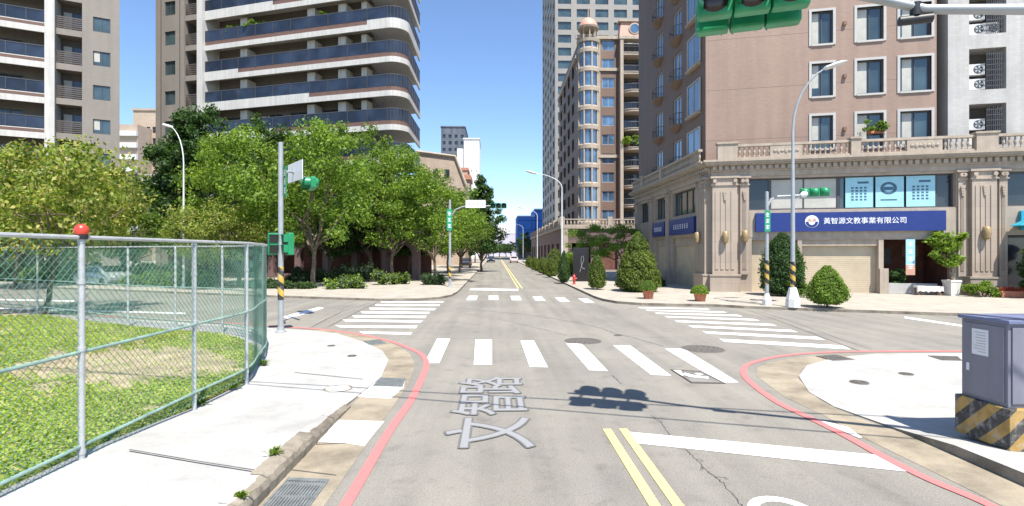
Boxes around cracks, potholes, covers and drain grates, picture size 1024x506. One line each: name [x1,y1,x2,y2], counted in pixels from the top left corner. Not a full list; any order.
utility cover [670,369,725,384]
drain grate [262,477,329,506]
drain grate [373,377,406,387]
manhole cover [681,345,725,353]
crack [651,415,743,506]
